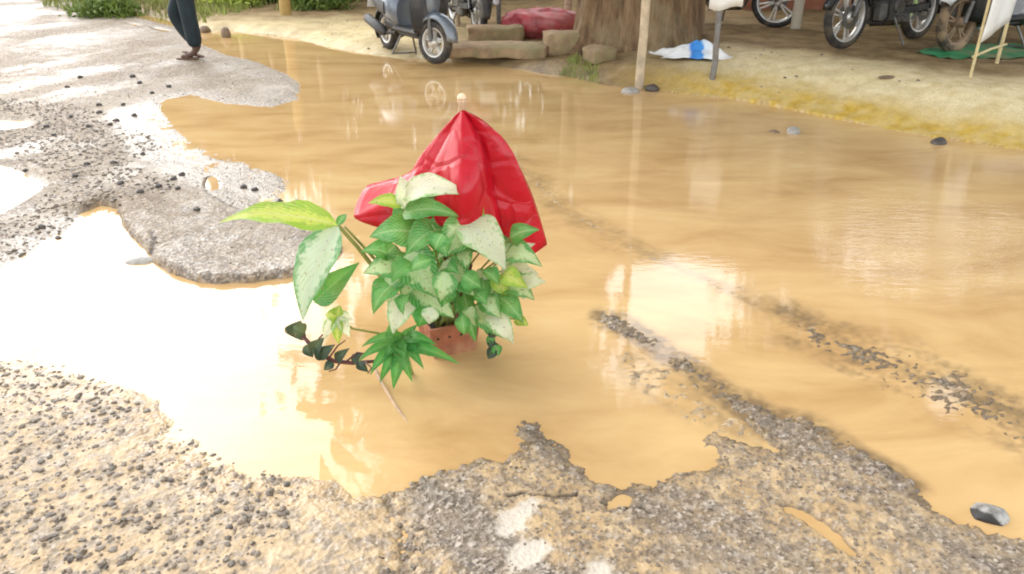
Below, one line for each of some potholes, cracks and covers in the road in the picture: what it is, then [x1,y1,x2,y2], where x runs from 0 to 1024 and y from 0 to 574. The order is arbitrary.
pothole [610,286,1024,535]
pothole [776,498,866,558]
pothole [204,176,219,191]
pothole [600,492,635,510]
pothole [0,158,57,215]
pothole [0,115,39,130]
pothole [0,201,718,489]
